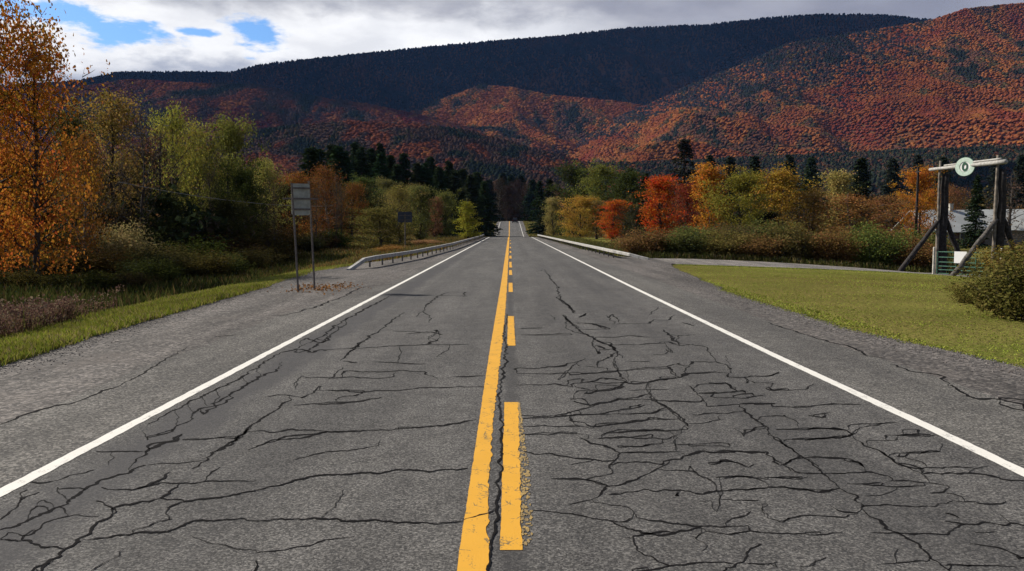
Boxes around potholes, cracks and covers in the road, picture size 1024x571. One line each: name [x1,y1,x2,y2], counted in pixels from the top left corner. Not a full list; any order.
crack [0,284,495,571]
crack [514,270,1024,571]
